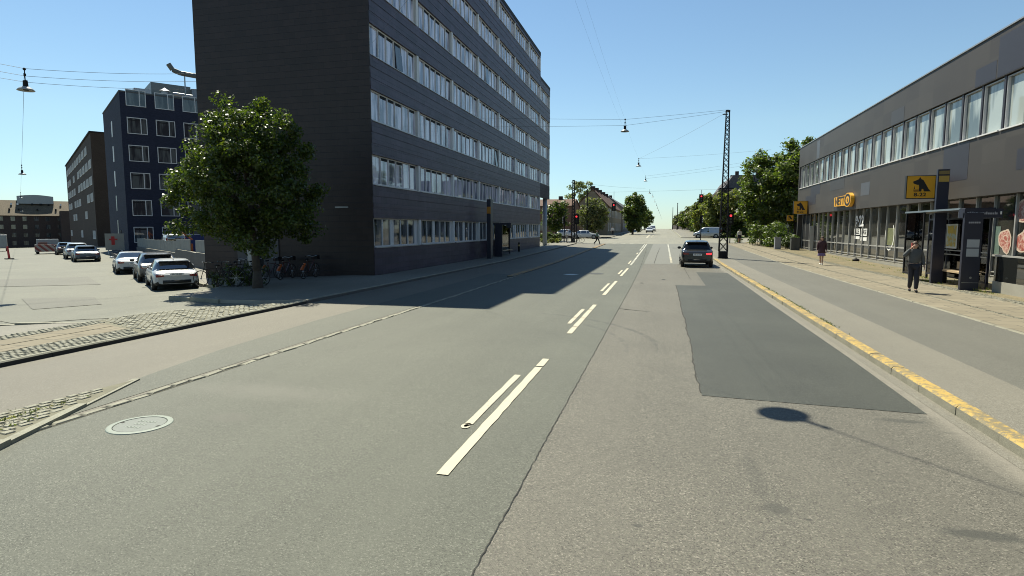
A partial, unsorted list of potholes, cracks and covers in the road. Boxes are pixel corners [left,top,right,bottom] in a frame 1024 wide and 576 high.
manhole cover [105,415,174,435]
